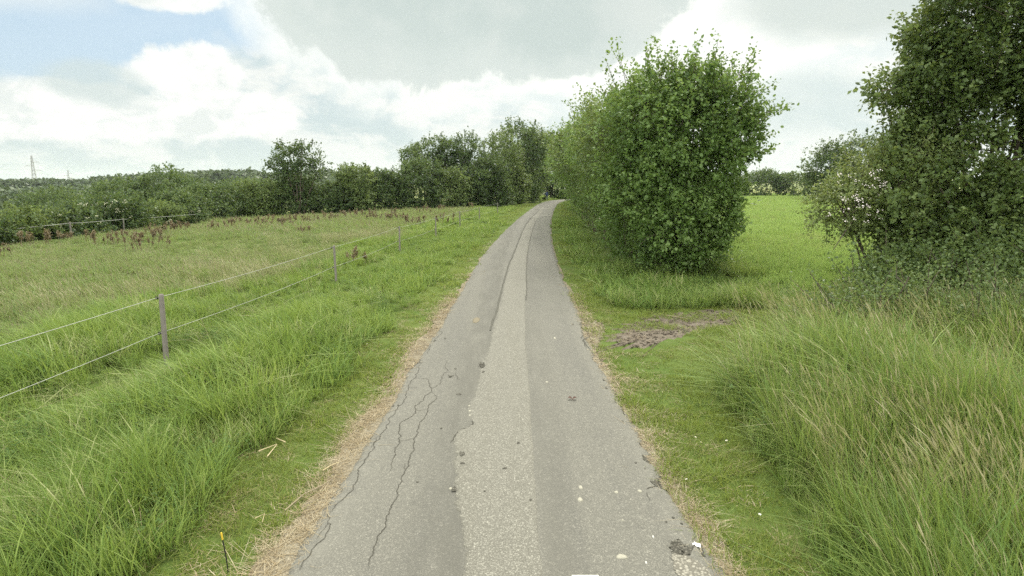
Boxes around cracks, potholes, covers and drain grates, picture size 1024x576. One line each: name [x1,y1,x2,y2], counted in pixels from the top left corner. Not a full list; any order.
pothole [669,539,694,555]
crack [300,333,458,568]
